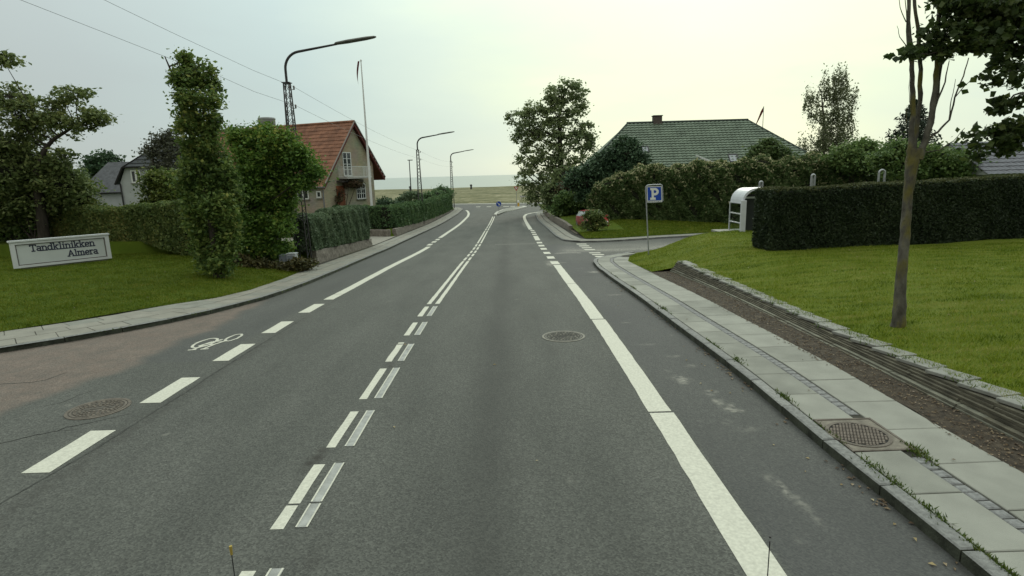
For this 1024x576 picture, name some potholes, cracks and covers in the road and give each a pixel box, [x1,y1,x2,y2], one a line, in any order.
manhole cover [64,398,132,420]
manhole cover [813,418,916,452]
manhole cover [542,331,585,342]
